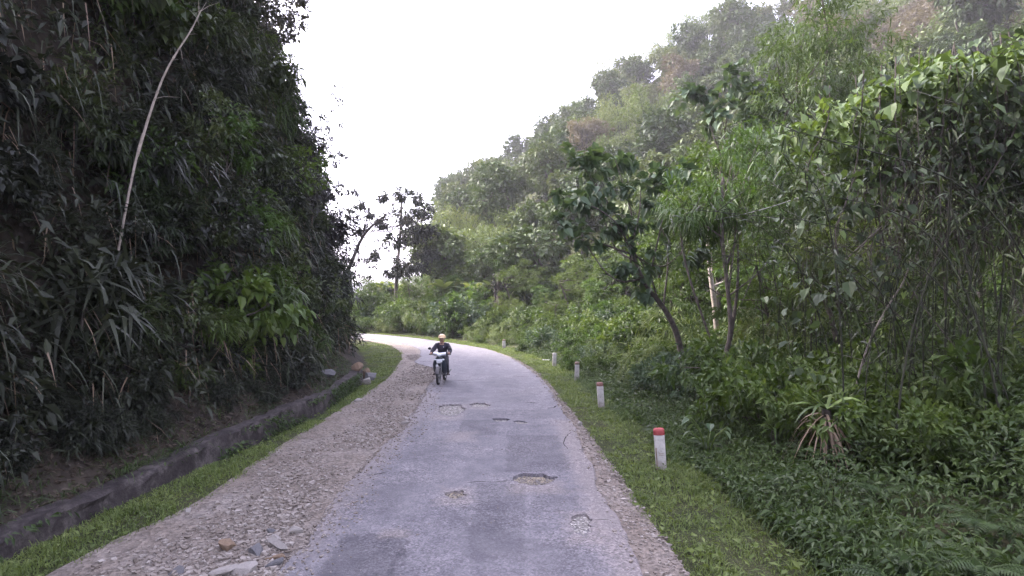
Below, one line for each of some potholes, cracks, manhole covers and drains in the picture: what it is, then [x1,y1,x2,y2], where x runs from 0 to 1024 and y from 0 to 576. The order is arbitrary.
pothole [569,514,593,536]
pothole [445,490,466,500]
pothole [513,473,558,486]
pothole [437,404,466,417]
